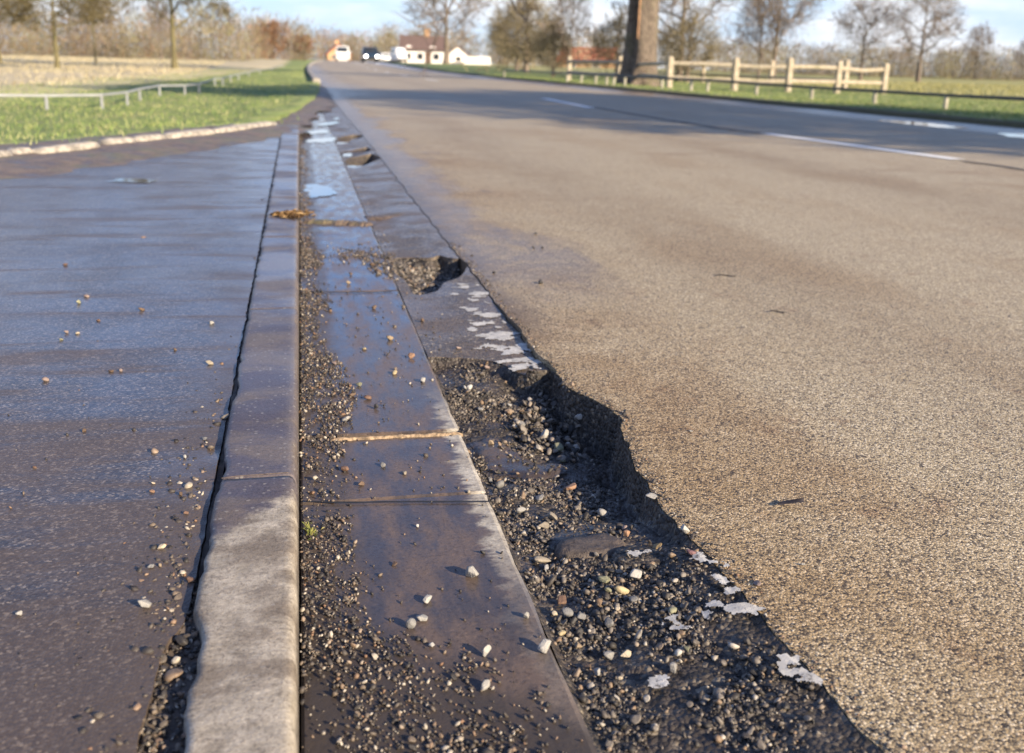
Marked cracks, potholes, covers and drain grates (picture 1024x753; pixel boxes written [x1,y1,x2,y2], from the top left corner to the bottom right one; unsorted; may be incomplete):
pothole [340,149,370,157]
pothole [345,156,379,166]
pothole [388,258,461,291]
pothole [428,358,882,753]
